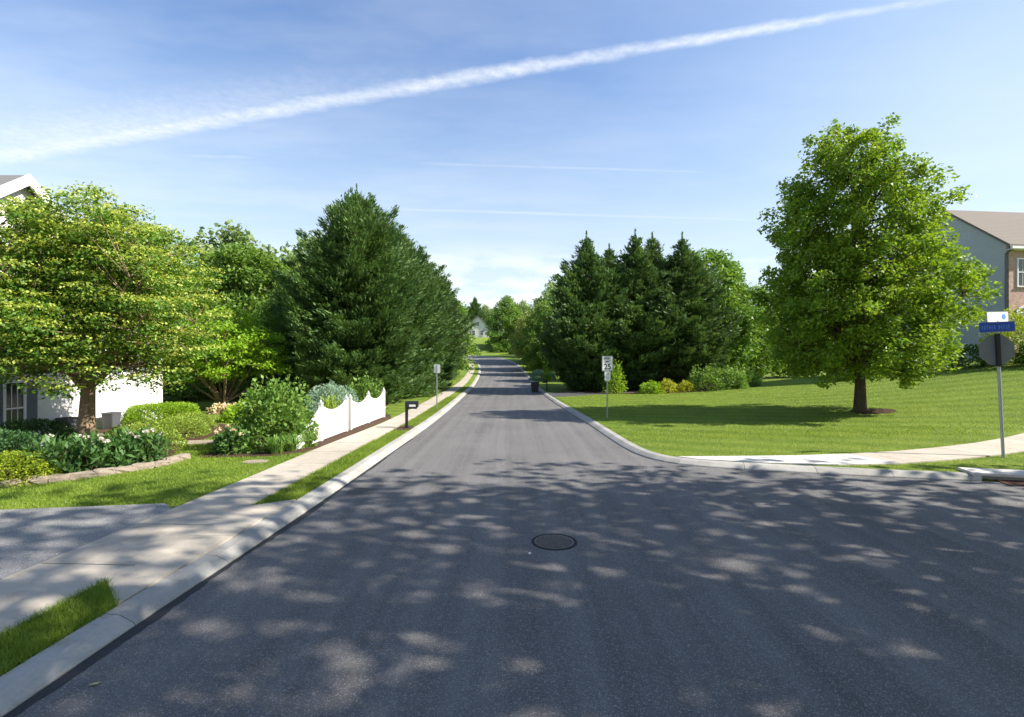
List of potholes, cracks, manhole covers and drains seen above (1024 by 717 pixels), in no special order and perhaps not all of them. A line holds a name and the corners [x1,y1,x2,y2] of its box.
manhole cover [531,534,577,550]
